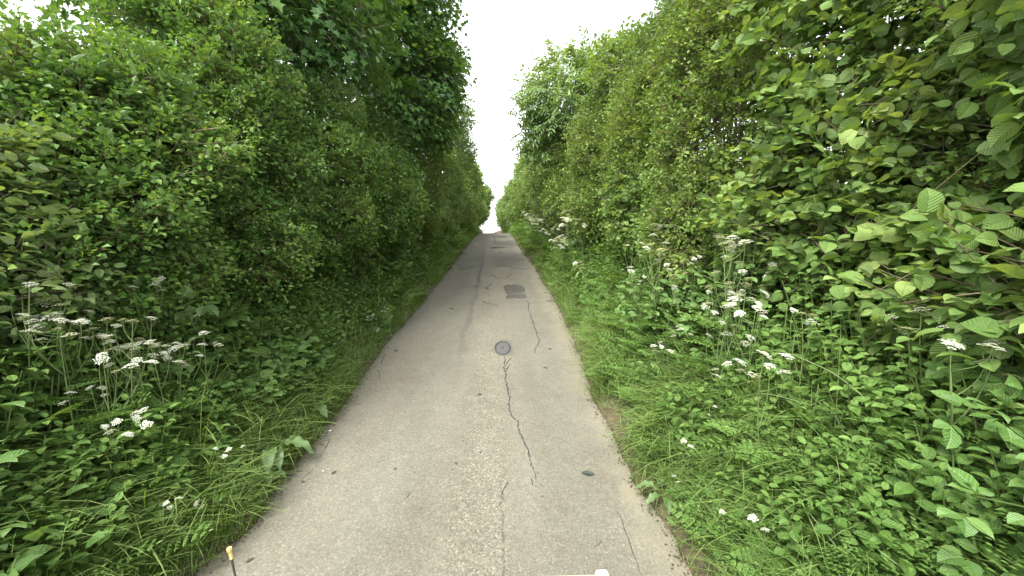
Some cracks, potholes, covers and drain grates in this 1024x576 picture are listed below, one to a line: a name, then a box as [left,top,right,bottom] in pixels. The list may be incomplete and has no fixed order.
crack [504,358,542,488]
manhole cover [494,341,511,355]
